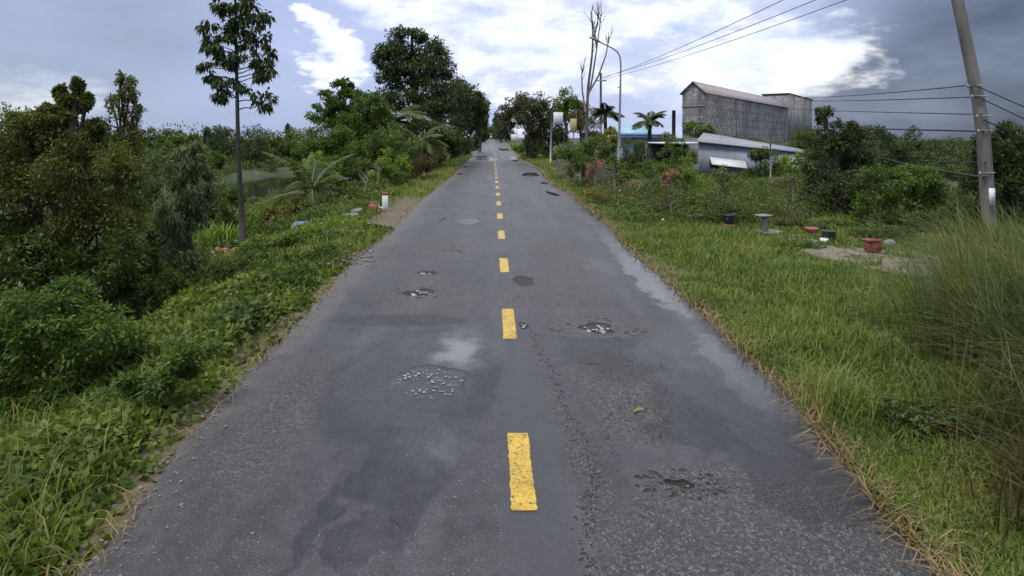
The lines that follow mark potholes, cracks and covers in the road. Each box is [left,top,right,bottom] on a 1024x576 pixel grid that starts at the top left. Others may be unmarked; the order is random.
crack [527,331,607,576]
pothole [388,364,469,405]
pothole [551,317,647,341]
pothole [633,469,728,501]
pothole [397,286,443,298]
